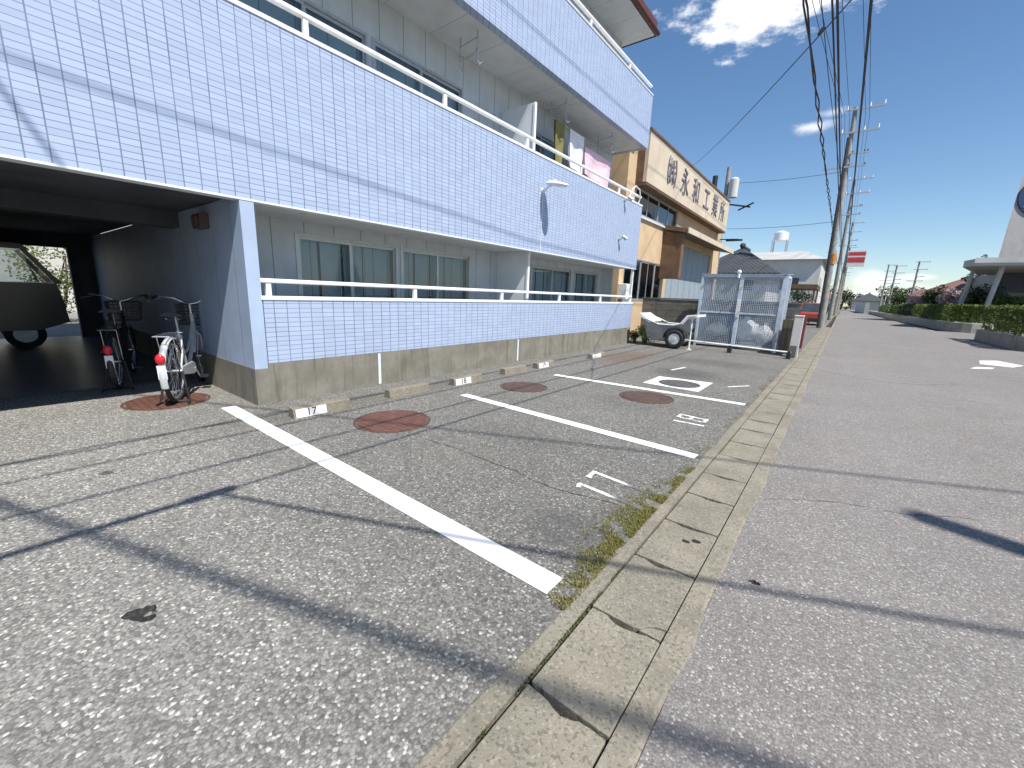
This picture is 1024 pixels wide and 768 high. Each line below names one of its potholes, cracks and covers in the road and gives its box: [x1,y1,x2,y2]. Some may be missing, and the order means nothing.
manhole cover [500,382,547,392]
manhole cover [353,410,431,433]
crack [424,438,620,506]
manhole cover [619,391,674,404]
pothole [121,604,157,623]
manhole cover [120,392,211,411]
crack [791,499,980,521]
manhole cover [658,380,700,388]
